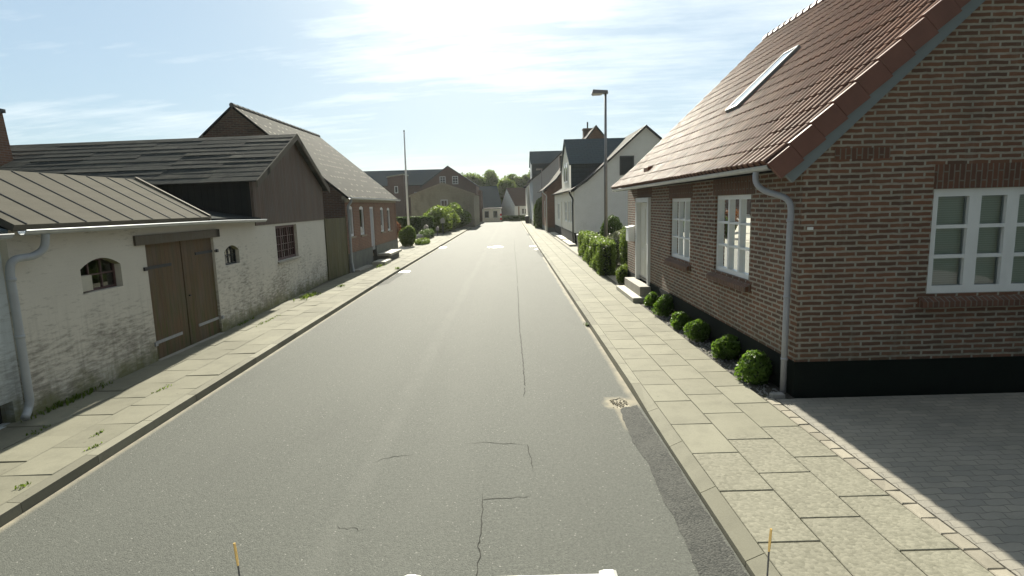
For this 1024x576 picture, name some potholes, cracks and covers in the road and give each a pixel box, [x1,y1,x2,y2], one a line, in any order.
crack [492,244,526,396]
crack [476,494,514,576]
